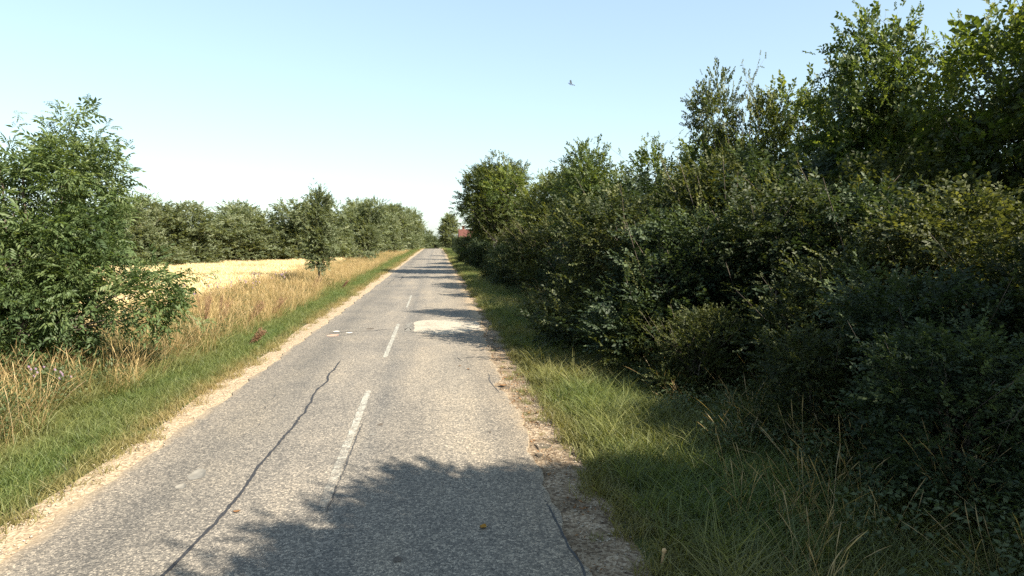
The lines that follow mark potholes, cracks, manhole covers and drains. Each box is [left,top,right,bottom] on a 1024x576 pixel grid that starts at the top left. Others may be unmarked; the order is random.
crack [546,503,586,576]
crack [160,360,363,576]
